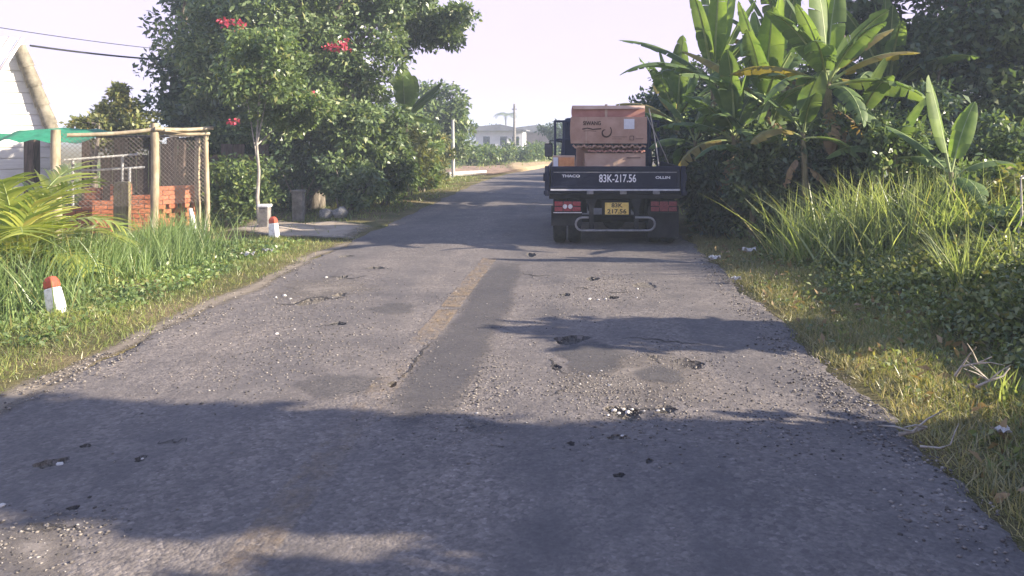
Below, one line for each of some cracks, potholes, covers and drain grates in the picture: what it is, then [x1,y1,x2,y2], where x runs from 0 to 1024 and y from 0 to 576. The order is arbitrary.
pothole [23,454,80,473]
crack [398,343,432,380]
pothole [548,334,597,347]
pothole [596,403,650,426]
crack [277,296,346,305]
pothole [664,355,711,371]
